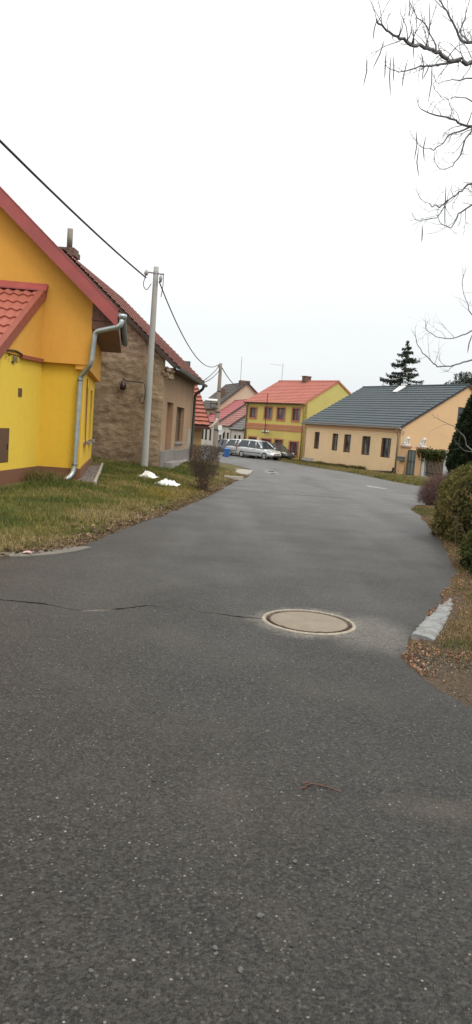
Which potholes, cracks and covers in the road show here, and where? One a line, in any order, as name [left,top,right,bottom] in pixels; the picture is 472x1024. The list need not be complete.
crack [0,599,261,619]
manhole cover [262,609,356,635]
